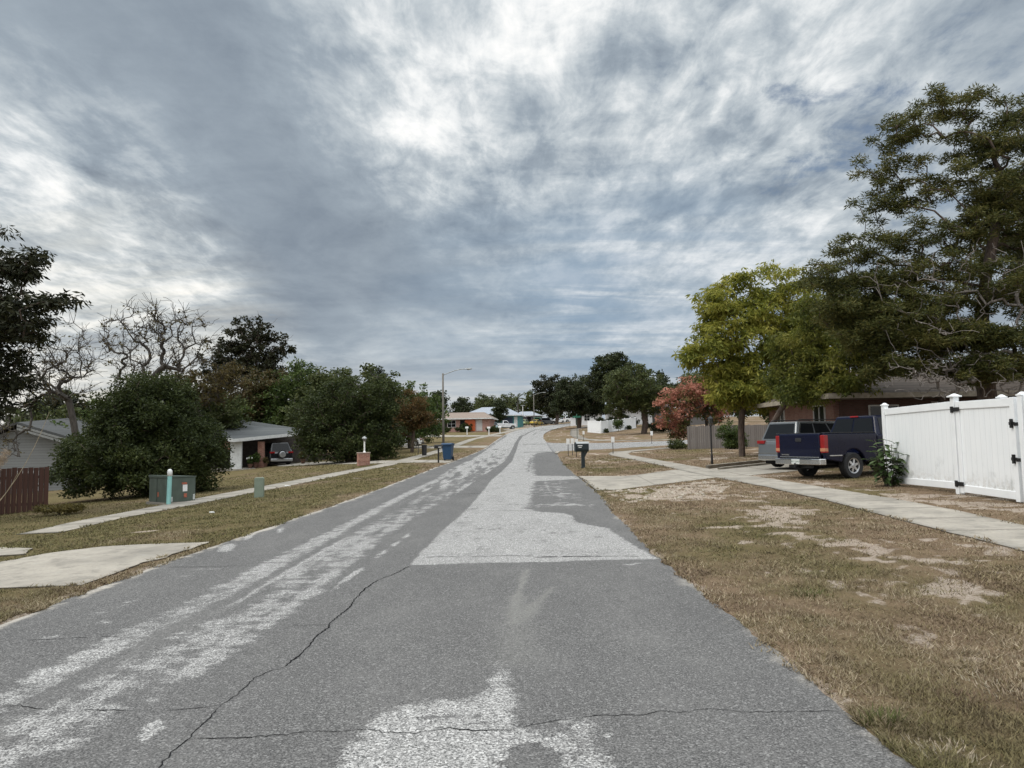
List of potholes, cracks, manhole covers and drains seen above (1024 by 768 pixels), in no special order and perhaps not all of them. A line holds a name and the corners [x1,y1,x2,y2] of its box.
crack [158,566,836,768]
